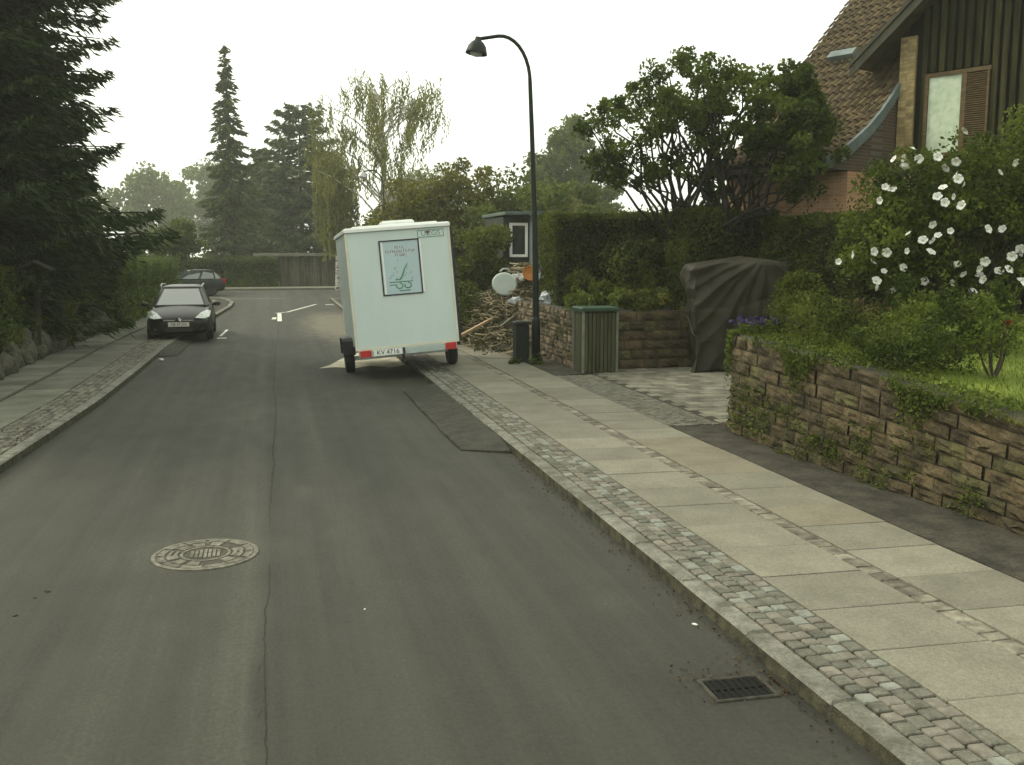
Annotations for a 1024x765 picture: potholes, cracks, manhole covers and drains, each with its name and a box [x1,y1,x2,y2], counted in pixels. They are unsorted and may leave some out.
drain grate [696,674,781,704]
crack [269,321,279,516]
crack [257,565,270,765]
manhole cover [151,539,259,571]
